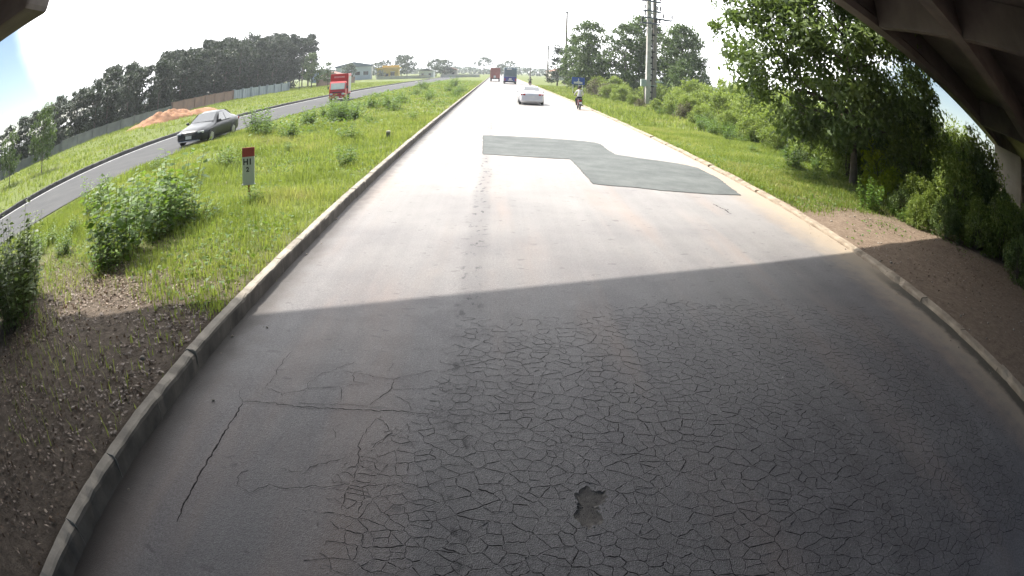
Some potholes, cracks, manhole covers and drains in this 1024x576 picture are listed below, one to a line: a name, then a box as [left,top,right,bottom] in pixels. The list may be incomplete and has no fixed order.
pothole [572,483,608,538]
crack [176,298,1024,576]
